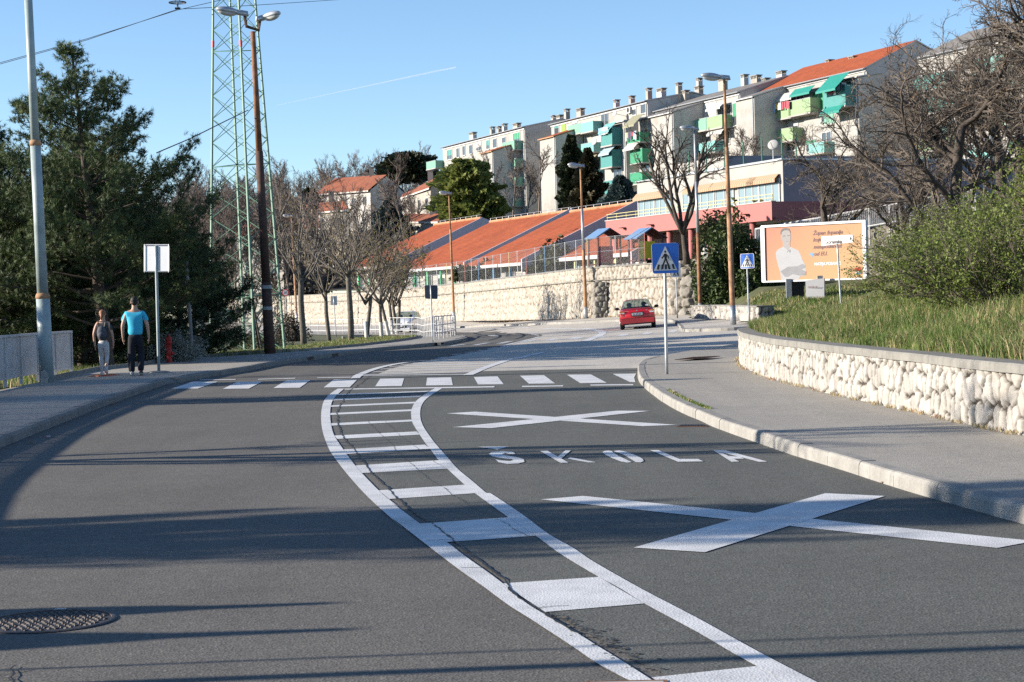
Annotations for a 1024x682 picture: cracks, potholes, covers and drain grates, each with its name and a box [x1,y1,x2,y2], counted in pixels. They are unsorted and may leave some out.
manhole cover [0,608,117,633]
